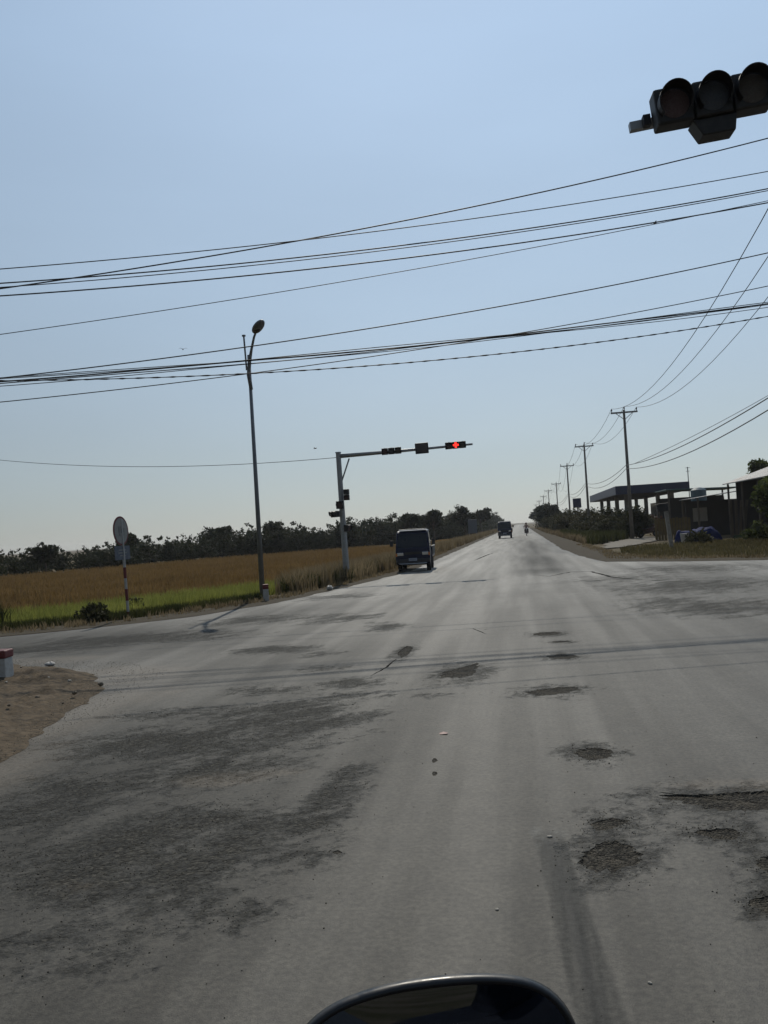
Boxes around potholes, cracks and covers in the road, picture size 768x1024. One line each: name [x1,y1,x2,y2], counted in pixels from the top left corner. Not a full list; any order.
pothole [590,818,630,831]
pothole [659,790,768,812]
pothole [397,646,414,658]
pothole [574,747,614,761]
pothole [748,896,768,913]
pothole [577,840,644,873]
pothole [694,828,740,840]
pothole [525,687,580,696]
pothole [439,663,480,678]
